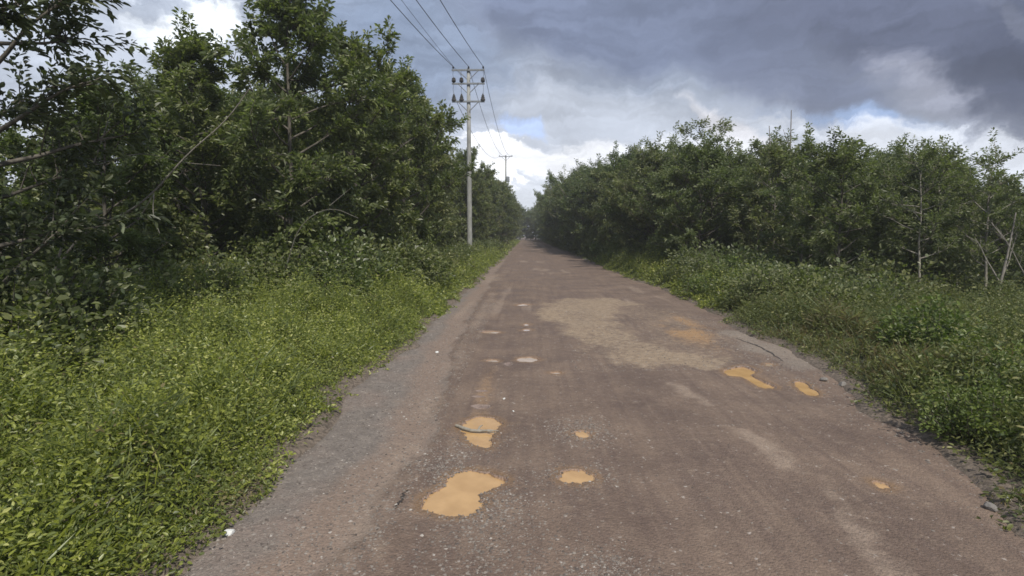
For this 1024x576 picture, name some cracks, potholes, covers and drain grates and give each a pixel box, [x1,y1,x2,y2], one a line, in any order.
pothole [420,469,508,516]
pothole [459,416,503,449]
pothole [794,381,820,396]
pothole [871,480,891,489]
pothole [723,365,777,389]
pothole [557,469,597,485]
